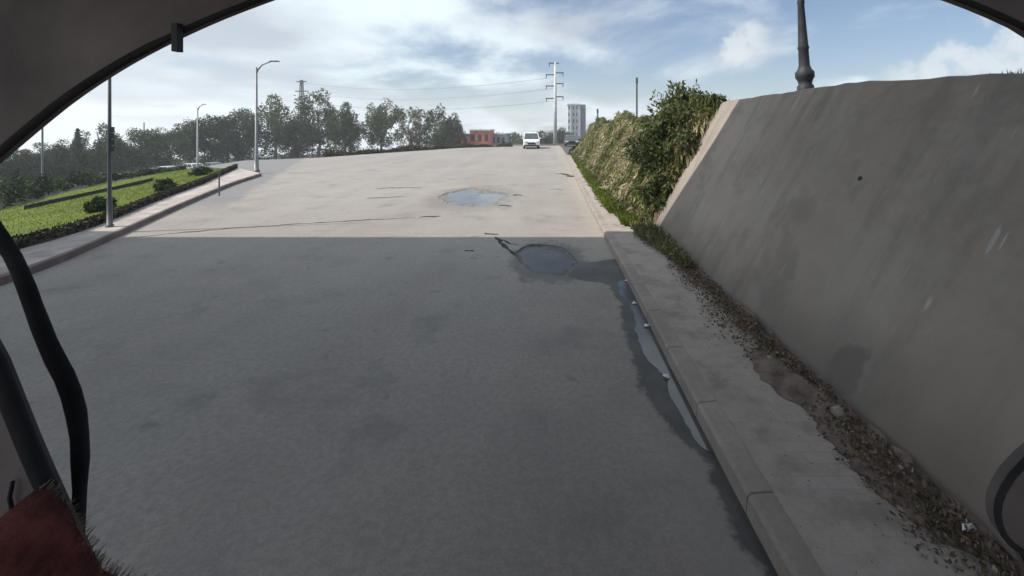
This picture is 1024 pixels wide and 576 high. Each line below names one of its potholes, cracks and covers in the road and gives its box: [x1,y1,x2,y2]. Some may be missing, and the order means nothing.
pothole [438,188,509,207]
crack [130,216,439,238]
pothole [515,244,579,276]
crack [464,233,520,255]
